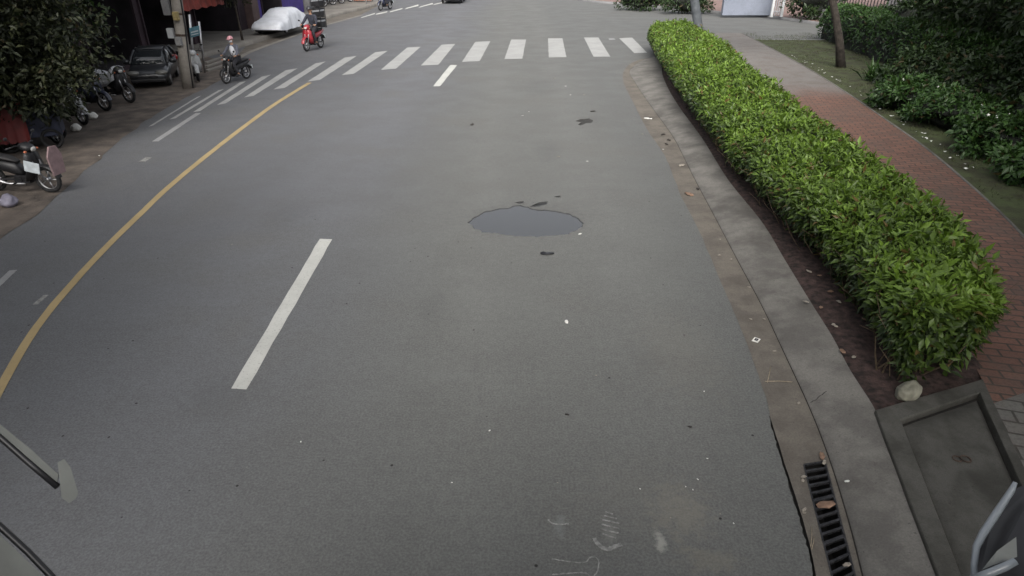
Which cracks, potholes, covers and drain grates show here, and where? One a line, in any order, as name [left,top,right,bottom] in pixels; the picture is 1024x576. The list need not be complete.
crack [770,419,816,576]
pothole [467,196,583,237]
drain grate [803,461,856,576]
